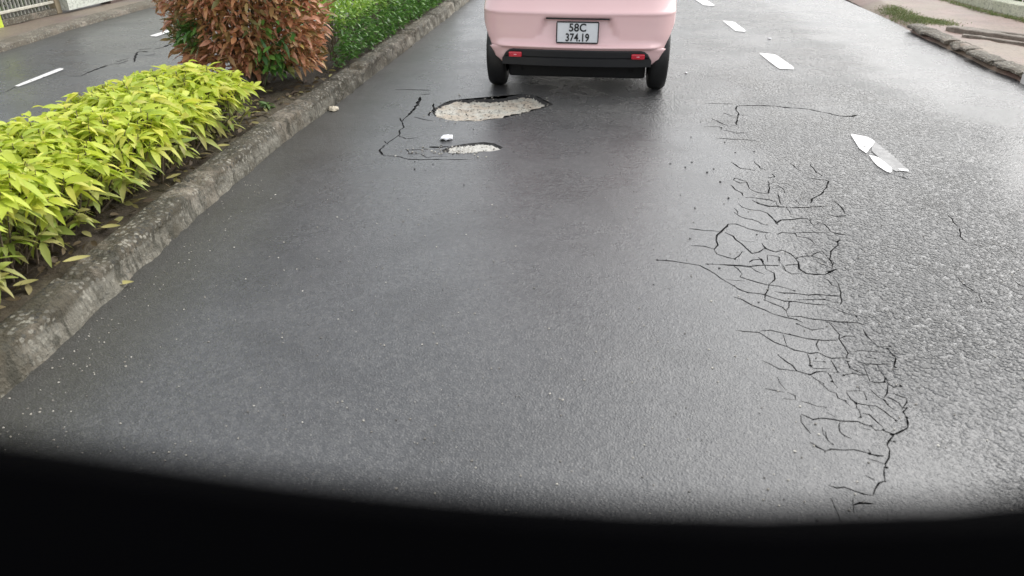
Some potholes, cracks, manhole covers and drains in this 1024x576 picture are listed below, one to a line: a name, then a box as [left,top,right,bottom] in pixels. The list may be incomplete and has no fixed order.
crack [708,103,857,141]
pothole [432,94,553,121]
crack [379,89,468,160]
crack [656,162,909,504]
crack [68,44,172,77]
pothole [442,142,503,153]
